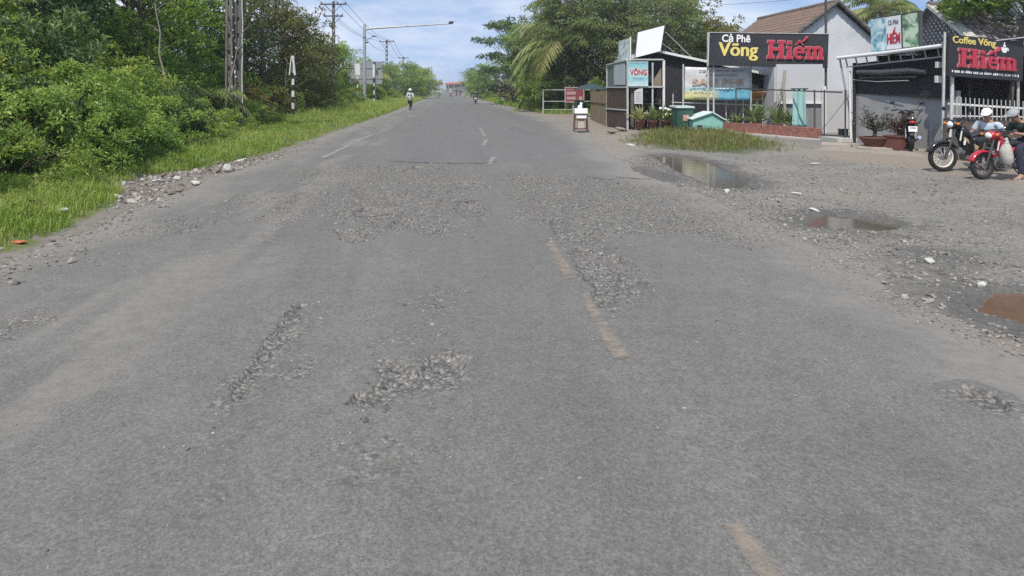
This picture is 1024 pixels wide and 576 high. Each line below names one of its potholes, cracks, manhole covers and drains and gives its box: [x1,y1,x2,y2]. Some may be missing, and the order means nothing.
pothole [448,180,497,191]
pothole [559,244,642,315]
pothole [541,216,582,245]
pothole [448,199,493,221]
pothole [783,210,924,233]
pothole [397,166,436,175]
pothole [379,216,430,233]
pothole [343,205,402,220]
pothole [948,282,1024,338]
pothole [326,348,480,419]
pothole [202,299,320,418]
